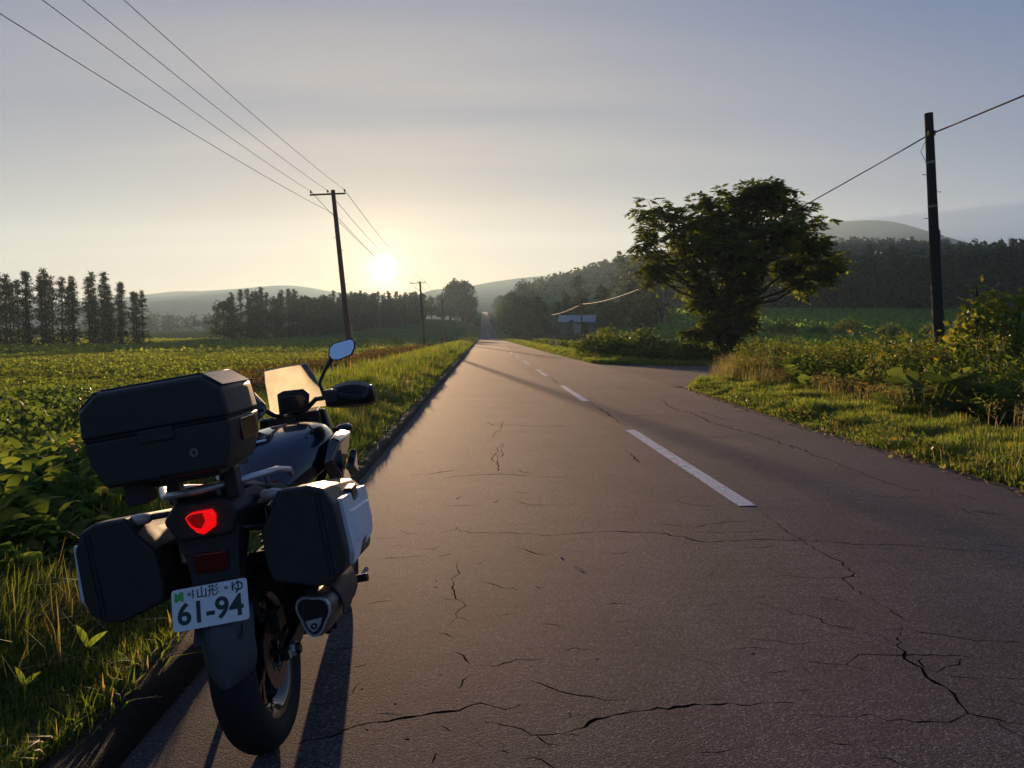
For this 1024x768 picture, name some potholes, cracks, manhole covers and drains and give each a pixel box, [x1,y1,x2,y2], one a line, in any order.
crack [301,523,815,768]
crack [456,513,1024,738]
crack [416,423,561,505]
